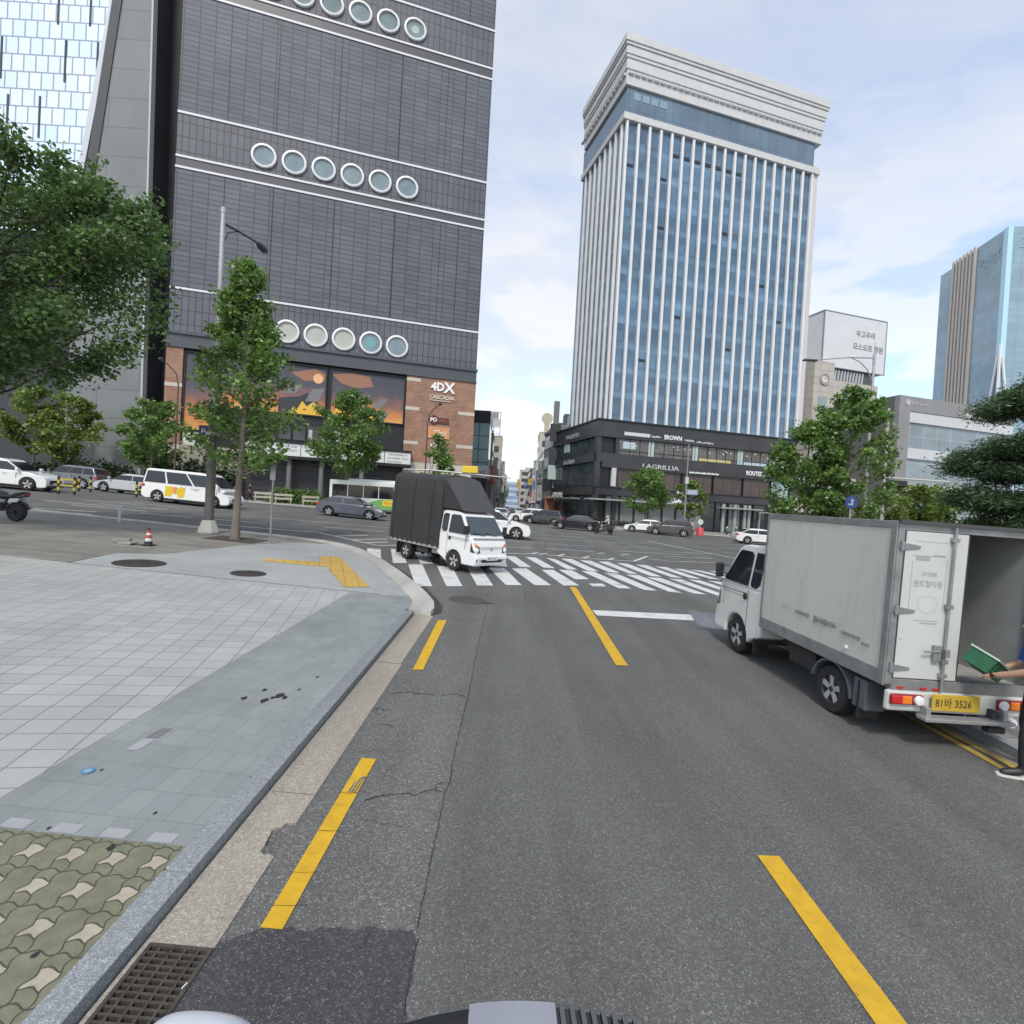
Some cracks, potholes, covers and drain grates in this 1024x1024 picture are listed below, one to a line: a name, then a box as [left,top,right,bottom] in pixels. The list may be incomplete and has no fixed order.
crack [283,781,447,906]
manhole cover [111,559,167,567]
manhole cover [449,596,485,604]
drain grate [84,942,214,1024]
